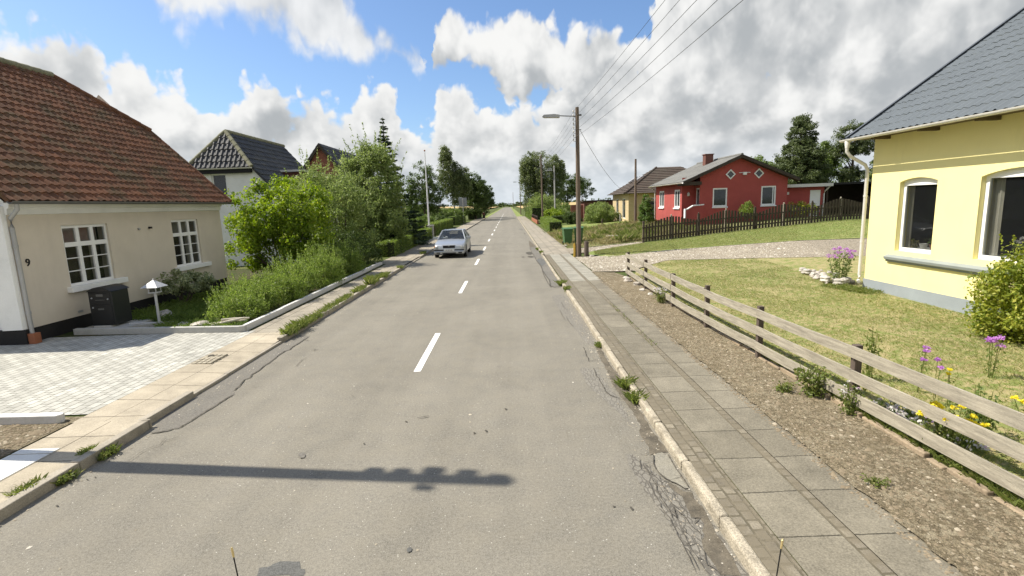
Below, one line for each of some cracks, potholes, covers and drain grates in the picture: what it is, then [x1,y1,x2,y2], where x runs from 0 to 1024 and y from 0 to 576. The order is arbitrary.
crack [640,452,719,573]
